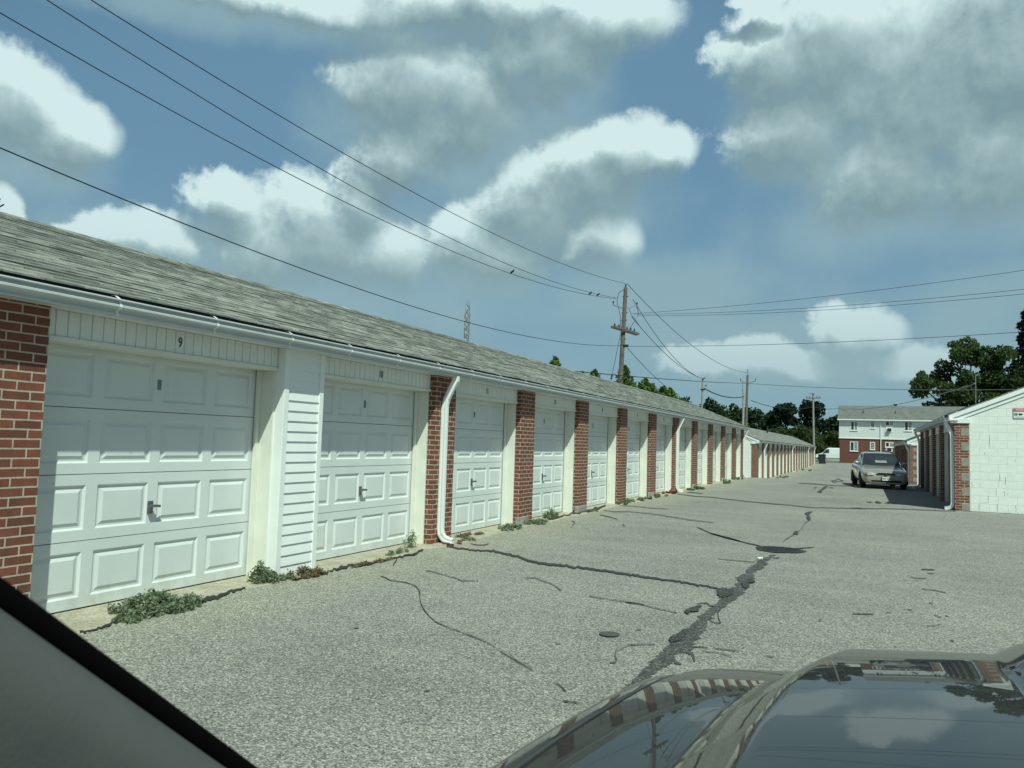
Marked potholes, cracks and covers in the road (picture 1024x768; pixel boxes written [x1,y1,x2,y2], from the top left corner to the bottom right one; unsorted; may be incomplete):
crack [798,479,854,489]
crack [548,492,950,688]
crack [296,549,533,670]
